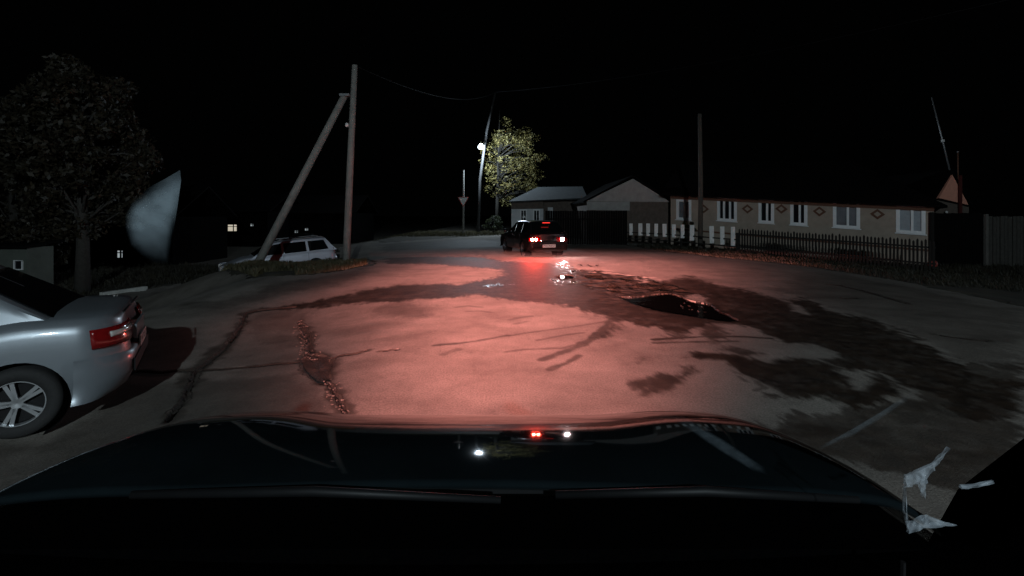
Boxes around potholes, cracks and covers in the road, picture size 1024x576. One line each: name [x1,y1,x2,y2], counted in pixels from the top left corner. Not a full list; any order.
crack [135,306,398,423]
pothole [614,293,742,322]
